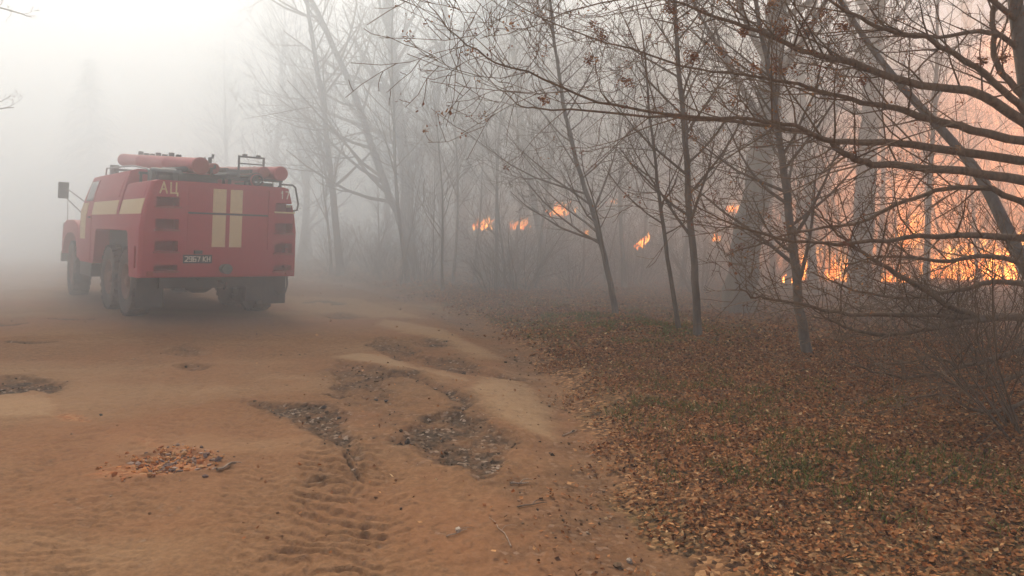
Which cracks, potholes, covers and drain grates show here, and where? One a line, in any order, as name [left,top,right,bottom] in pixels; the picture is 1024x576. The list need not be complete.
pothole [0,375,67,395]
pothole [329,360,405,405]
pothole [400,412,521,481]
pothole [240,401,361,462]
pothole [414,339,453,348]
pothole [176,363,211,371]
pothole [367,338,422,362]
